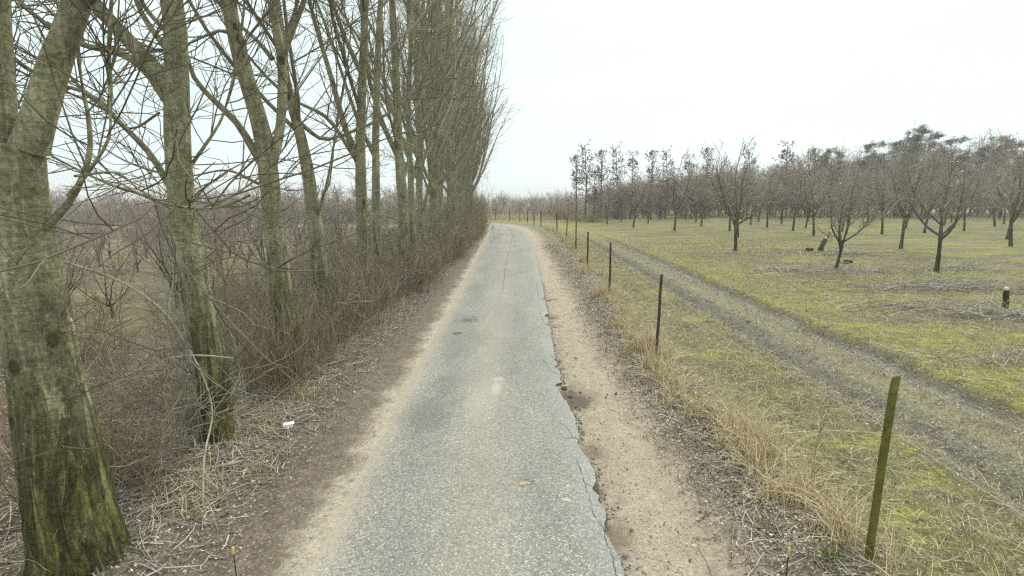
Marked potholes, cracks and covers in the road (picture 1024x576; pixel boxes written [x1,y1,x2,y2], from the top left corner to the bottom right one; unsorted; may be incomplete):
crack [576,459,616,574]
